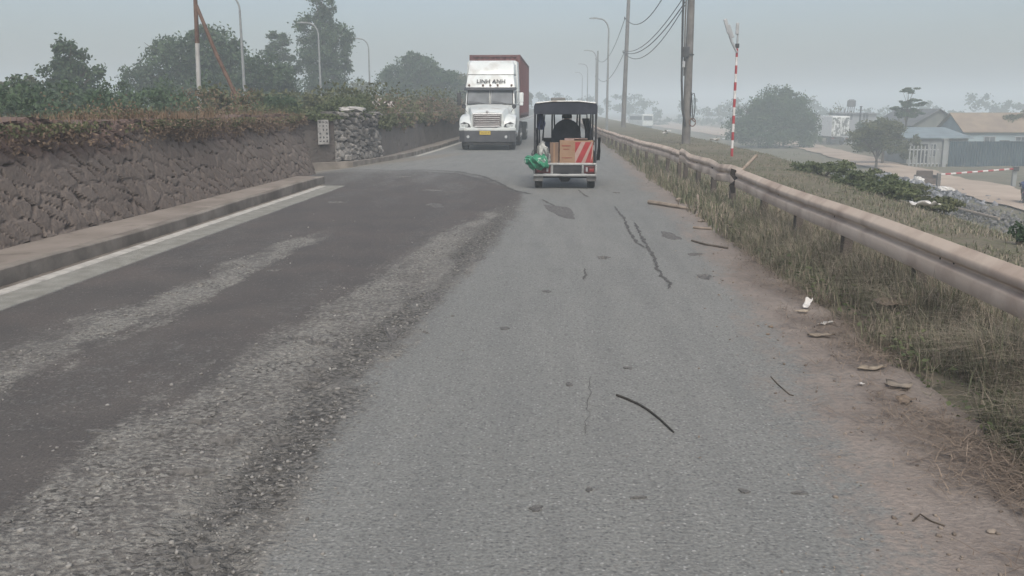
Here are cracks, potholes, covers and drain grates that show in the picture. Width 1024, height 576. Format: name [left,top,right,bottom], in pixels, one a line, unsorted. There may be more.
crack [615,207,672,289]
